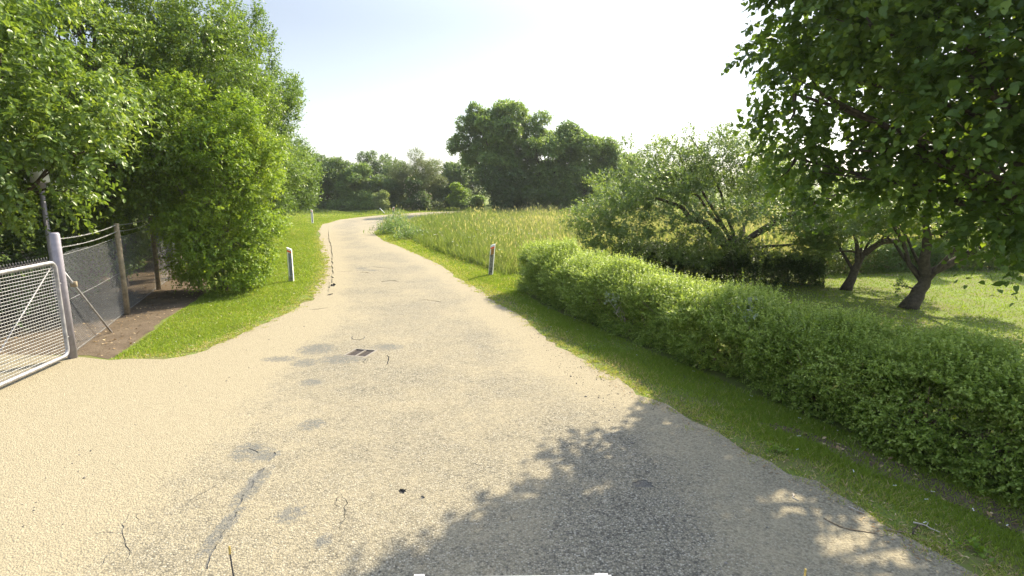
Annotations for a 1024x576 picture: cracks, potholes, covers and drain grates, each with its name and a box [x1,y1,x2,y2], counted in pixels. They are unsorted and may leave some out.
crack [96,513,138,568]
drain grate [345,348,377,357]
crack [205,448,276,569]
